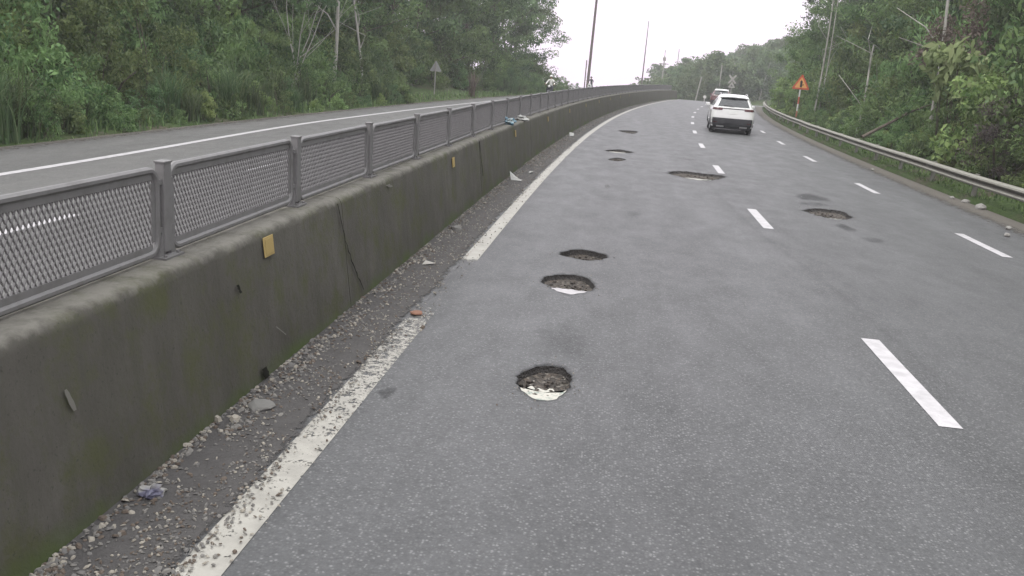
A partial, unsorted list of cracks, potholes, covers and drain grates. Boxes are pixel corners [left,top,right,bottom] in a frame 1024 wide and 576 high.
pothole [516,366,572,401]
pothole [560,250,607,261]
pothole [668,171,724,180]
pothole [804,208,852,220]
pothole [541,275,595,294]
